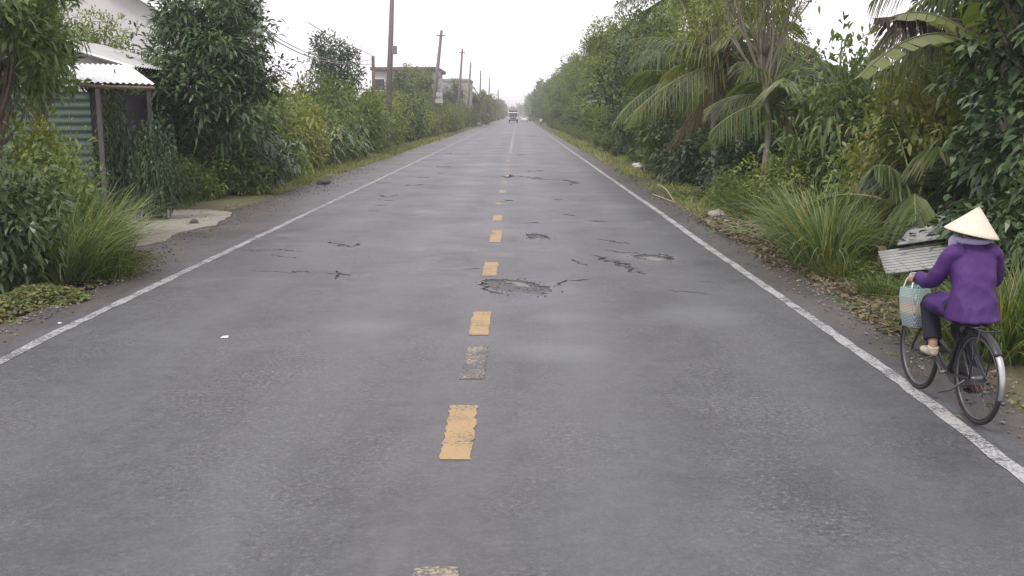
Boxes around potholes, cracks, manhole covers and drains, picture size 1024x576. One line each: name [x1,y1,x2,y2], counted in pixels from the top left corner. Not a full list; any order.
crack [554,239,675,287]
pothole [476,276,563,297]
pothole [627,251,679,263]
